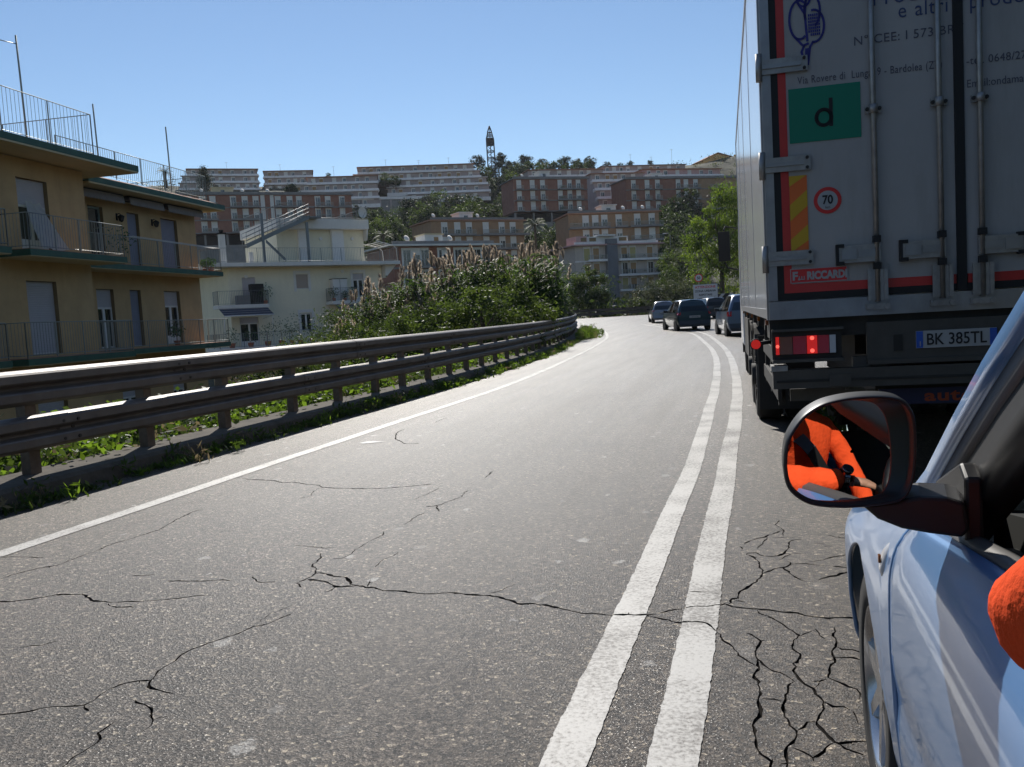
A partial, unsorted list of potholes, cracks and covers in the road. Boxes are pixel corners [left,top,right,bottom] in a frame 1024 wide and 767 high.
crack [296,521,866,767]
crack [0,607,292,767]
crack [248,479,467,525]
crack [0,579,229,608]
